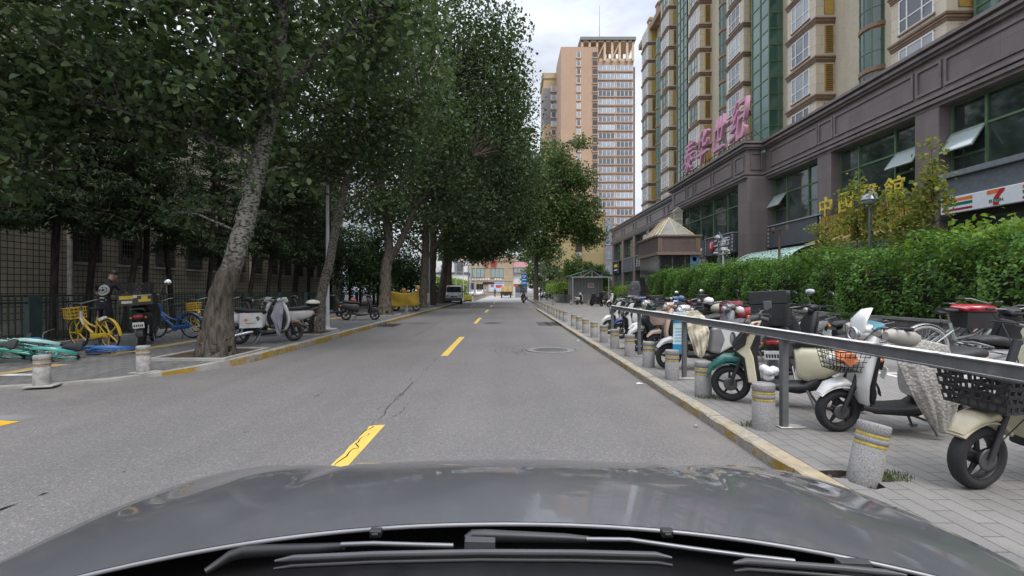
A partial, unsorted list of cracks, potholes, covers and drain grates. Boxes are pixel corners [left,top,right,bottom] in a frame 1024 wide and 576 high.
crack [335,359,436,465]
